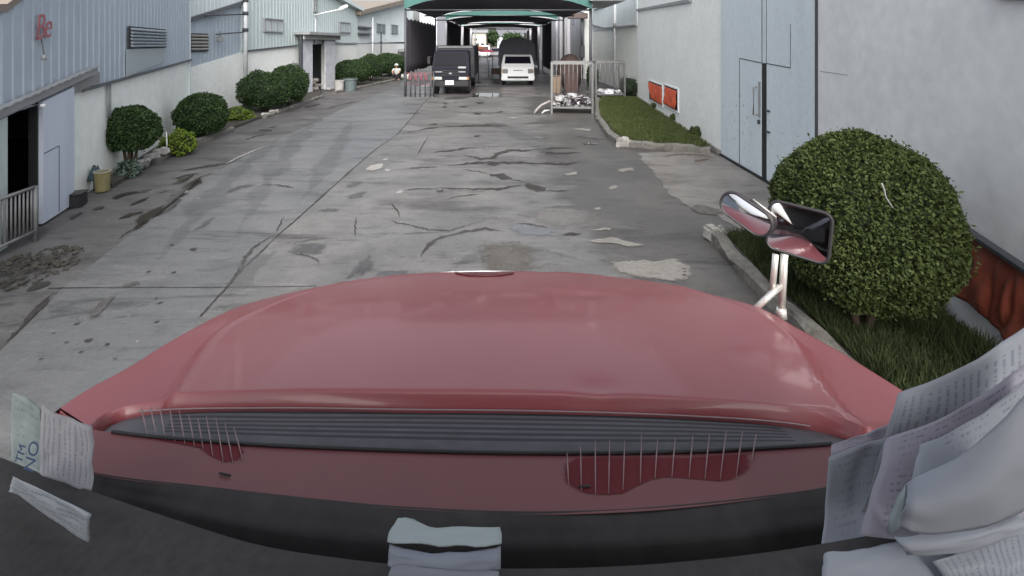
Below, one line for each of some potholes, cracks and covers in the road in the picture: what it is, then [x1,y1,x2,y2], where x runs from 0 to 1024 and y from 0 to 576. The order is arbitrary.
crack [382,113,596,256]
crack [223,217,284,292]
